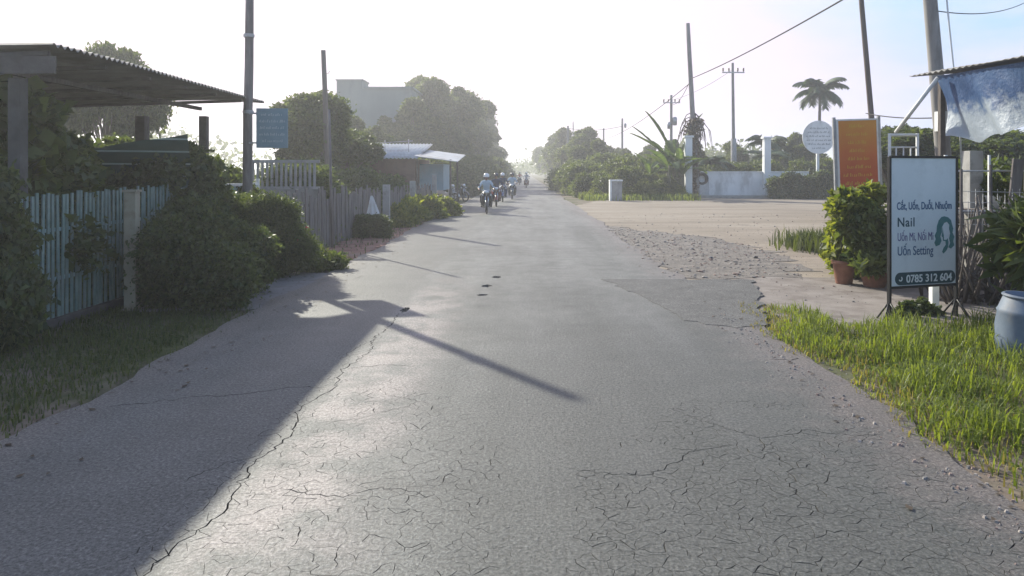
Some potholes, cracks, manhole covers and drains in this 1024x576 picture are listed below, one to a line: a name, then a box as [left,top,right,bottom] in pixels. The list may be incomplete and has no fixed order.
crack [109,315,398,576]
crack [566,399,1024,576]
crack [203,376,512,576]
